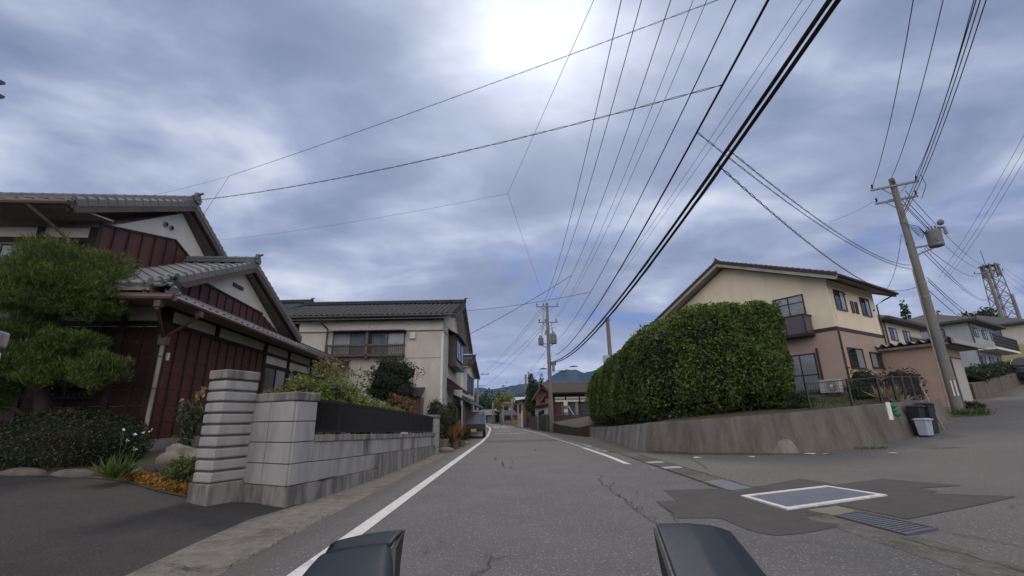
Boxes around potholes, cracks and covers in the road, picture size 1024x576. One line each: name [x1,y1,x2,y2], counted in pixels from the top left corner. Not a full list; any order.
drain grate [834,511,939,536]
crack [598,473,679,523]
